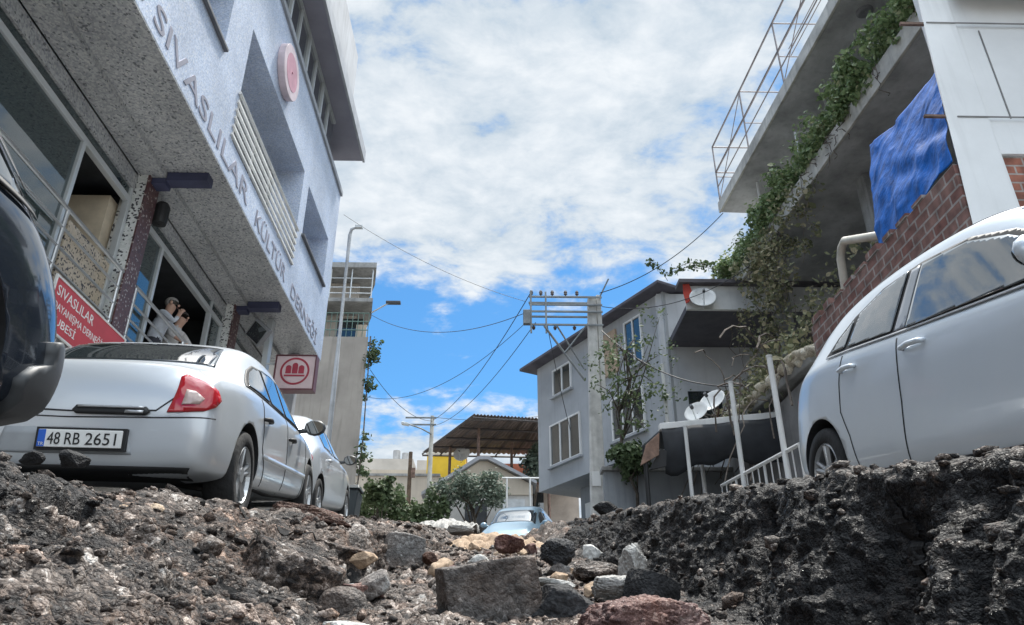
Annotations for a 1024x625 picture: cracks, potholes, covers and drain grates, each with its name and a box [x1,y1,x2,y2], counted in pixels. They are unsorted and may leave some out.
crack [885,495,926,606]
